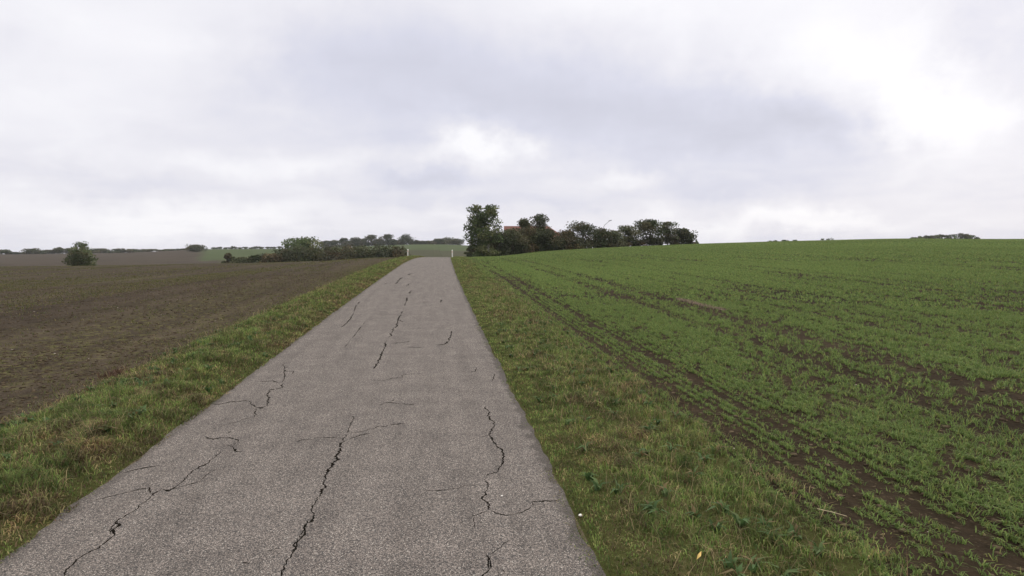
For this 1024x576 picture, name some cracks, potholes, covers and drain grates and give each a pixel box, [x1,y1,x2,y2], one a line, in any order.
crack [424,407,560,528]
crack [241,416,402,576]
crack [64,452,221,576]
crack [482,540,509,576]
crack [206,365,294,452]
